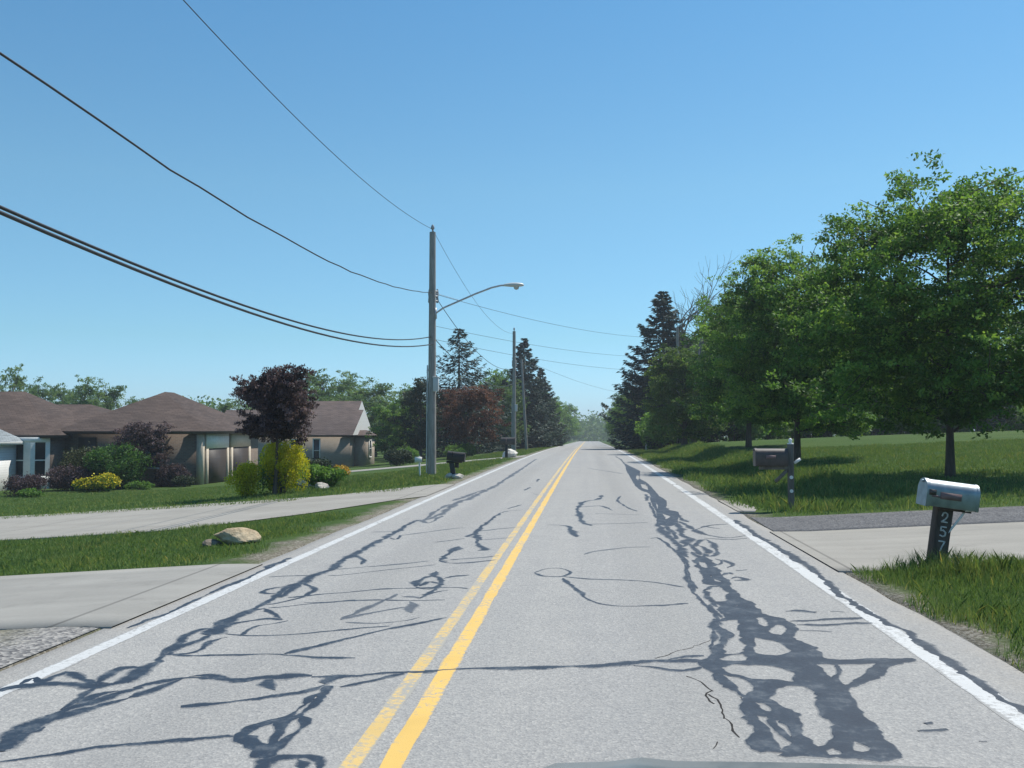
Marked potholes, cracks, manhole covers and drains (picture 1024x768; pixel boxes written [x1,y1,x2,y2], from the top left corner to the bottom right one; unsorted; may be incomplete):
crack [687,676,742,748]
